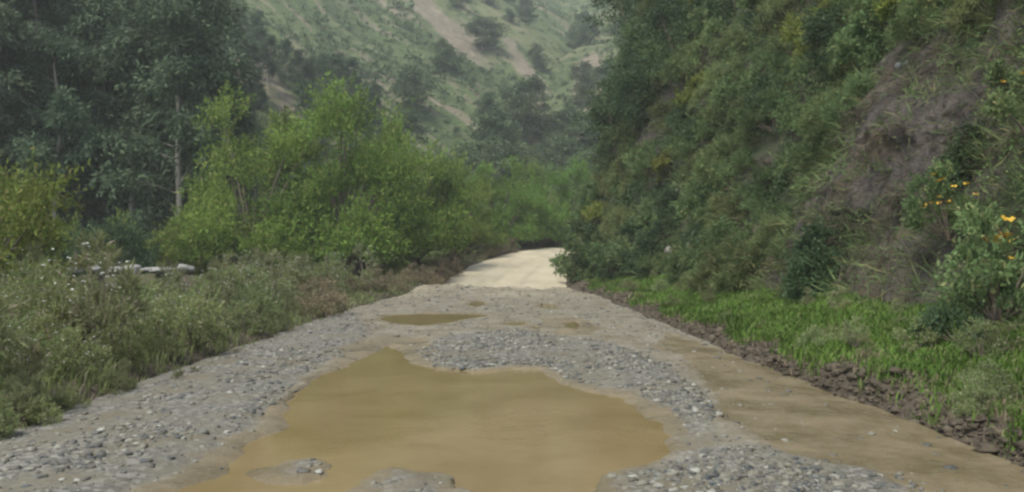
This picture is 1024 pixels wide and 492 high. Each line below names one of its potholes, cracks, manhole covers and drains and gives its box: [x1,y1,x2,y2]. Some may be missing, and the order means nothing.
pothole [559,319,586,330]
pothole [375,312,492,326]
pothole [135,342,686,492]
